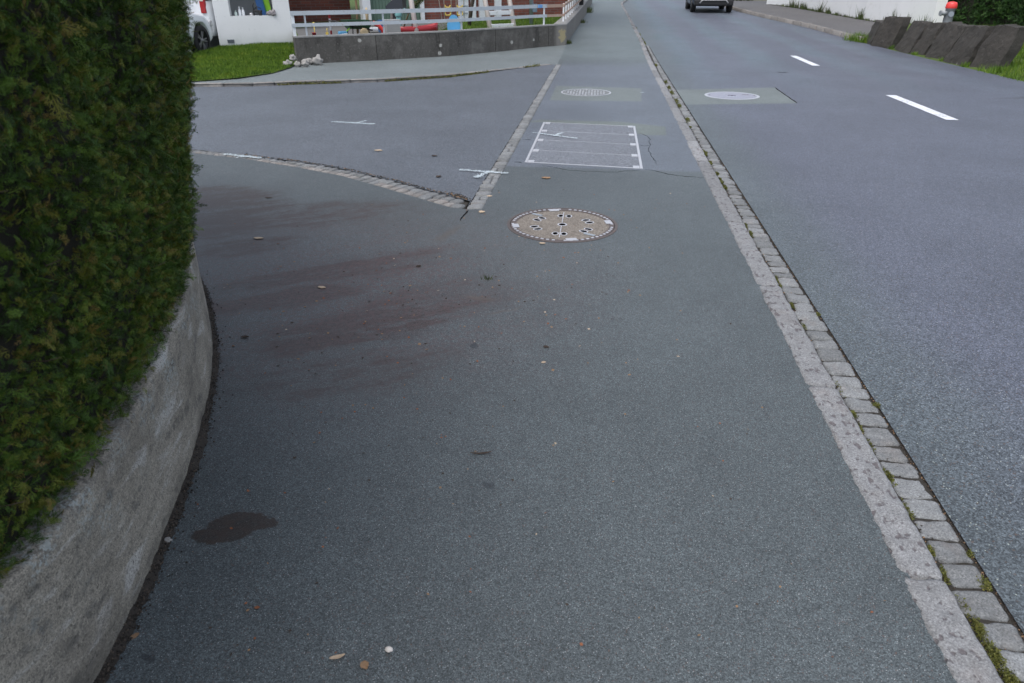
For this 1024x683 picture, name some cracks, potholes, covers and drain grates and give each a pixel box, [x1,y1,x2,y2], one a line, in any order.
crack [549,133,701,178]
manhole cover [507,208,618,243]
manhole cover [704,92,760,100]
